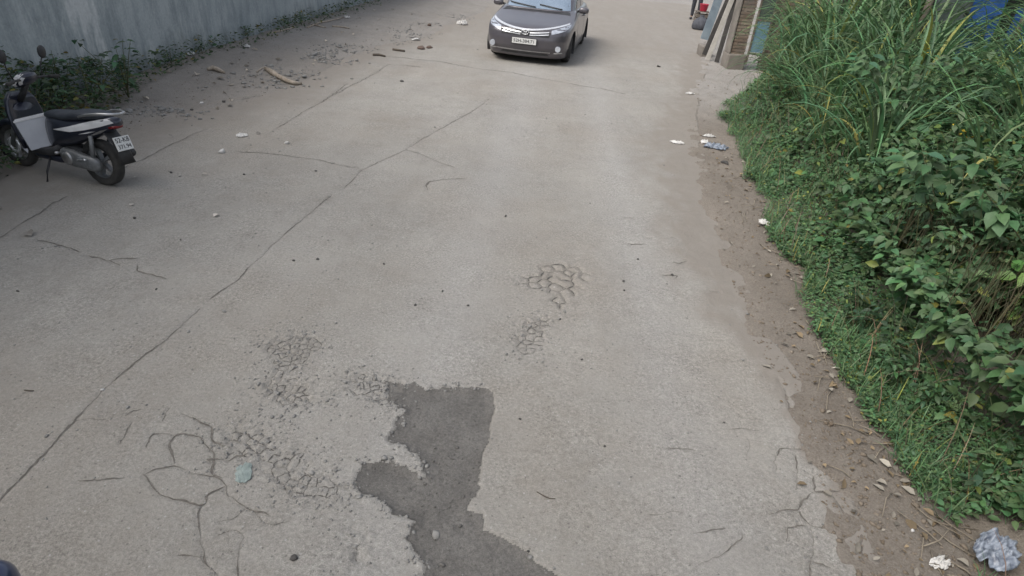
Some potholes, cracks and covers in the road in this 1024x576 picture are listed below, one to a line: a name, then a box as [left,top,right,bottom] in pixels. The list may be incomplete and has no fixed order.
crack [12,27,863,576]
